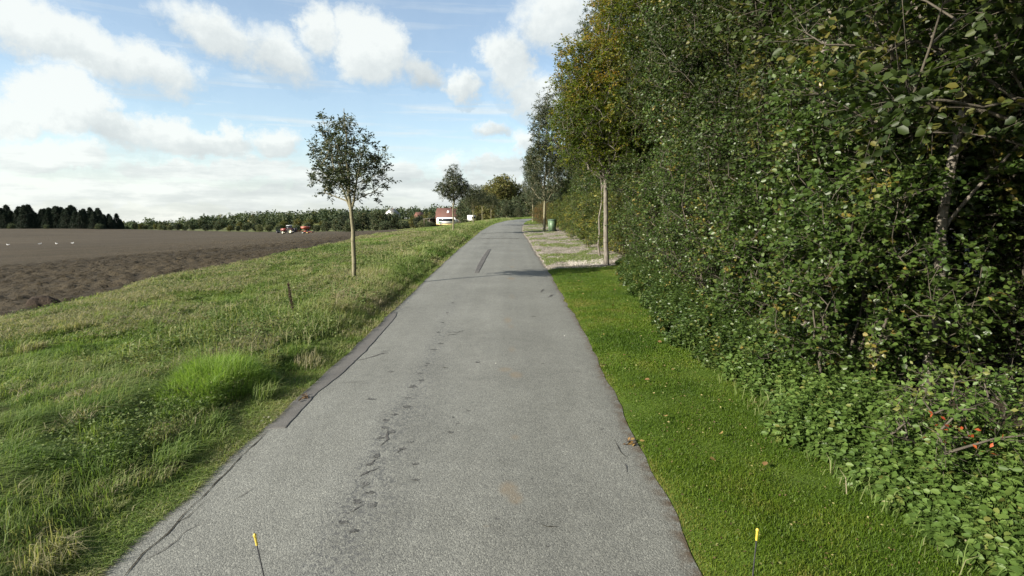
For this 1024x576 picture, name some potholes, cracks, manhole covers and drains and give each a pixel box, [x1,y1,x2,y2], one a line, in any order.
crack [358,426,403,488]
